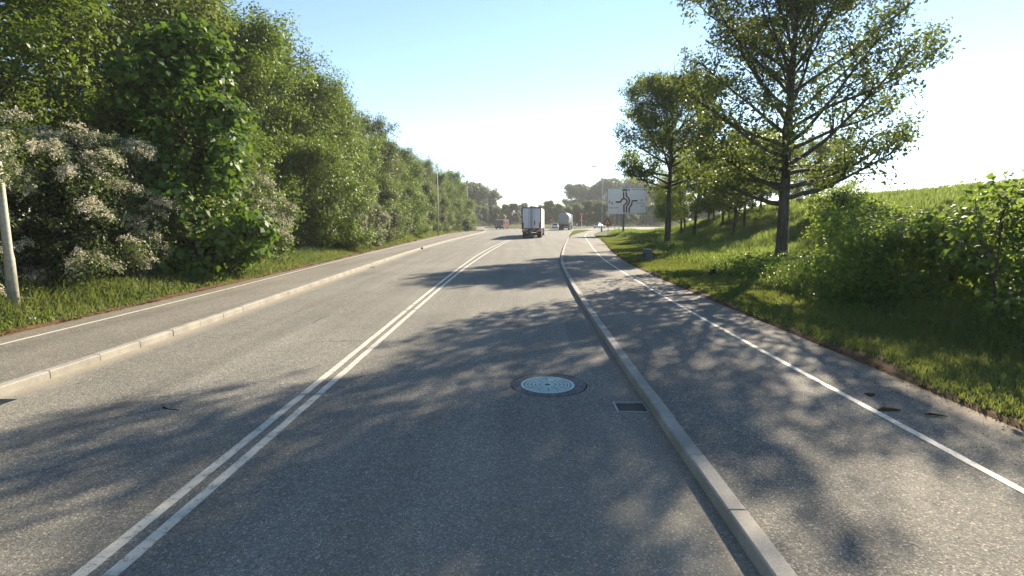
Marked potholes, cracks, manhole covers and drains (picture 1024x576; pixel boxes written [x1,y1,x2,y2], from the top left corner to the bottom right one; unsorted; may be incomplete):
drain grate [613,402,650,412]
manhole cover [511,374,587,397]
